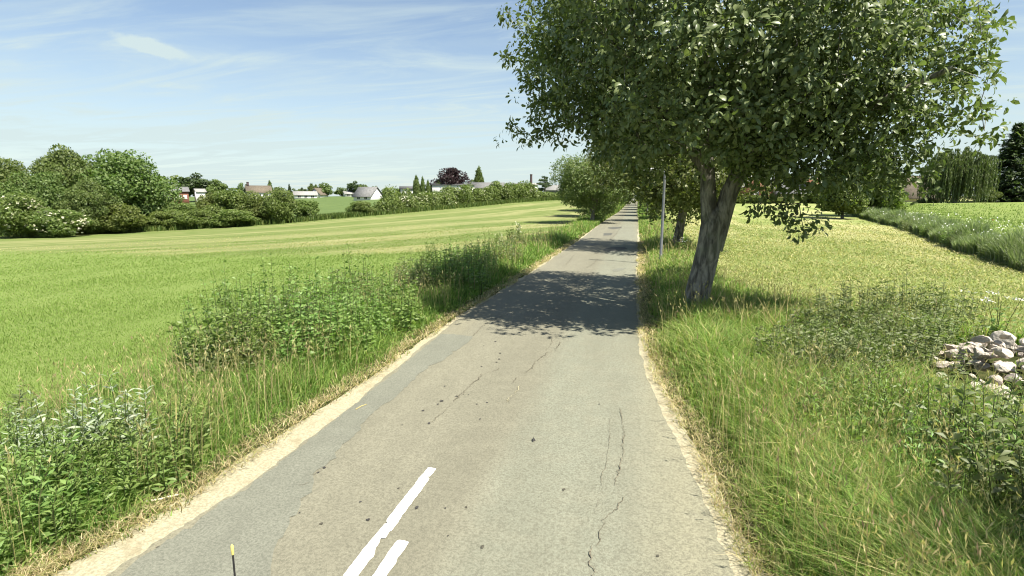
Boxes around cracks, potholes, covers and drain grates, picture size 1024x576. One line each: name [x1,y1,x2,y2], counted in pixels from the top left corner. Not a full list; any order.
crack [589,407,626,575]
